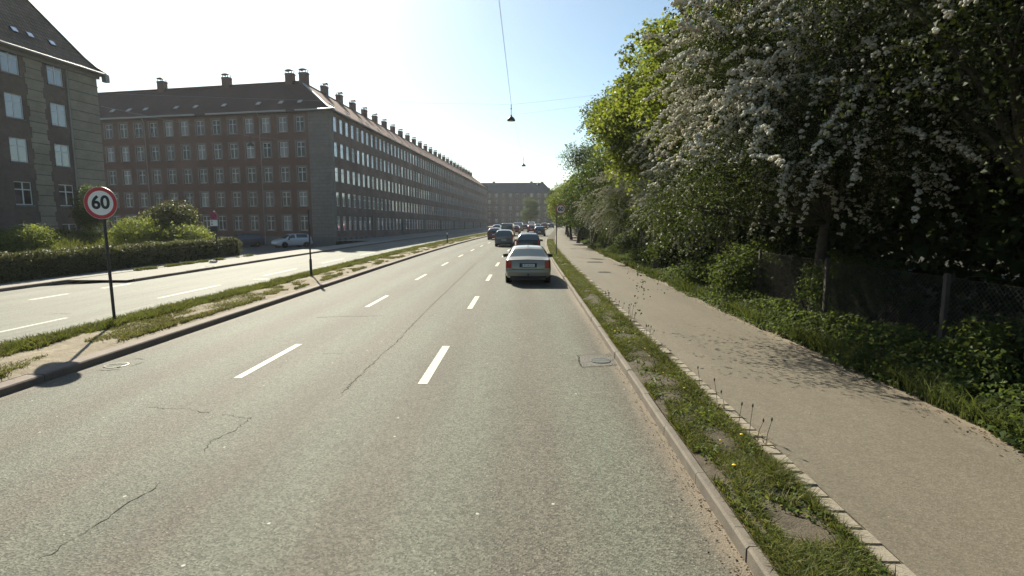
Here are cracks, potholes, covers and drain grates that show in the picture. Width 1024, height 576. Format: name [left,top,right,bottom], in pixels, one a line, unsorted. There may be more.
crack [38,408,246,560]
